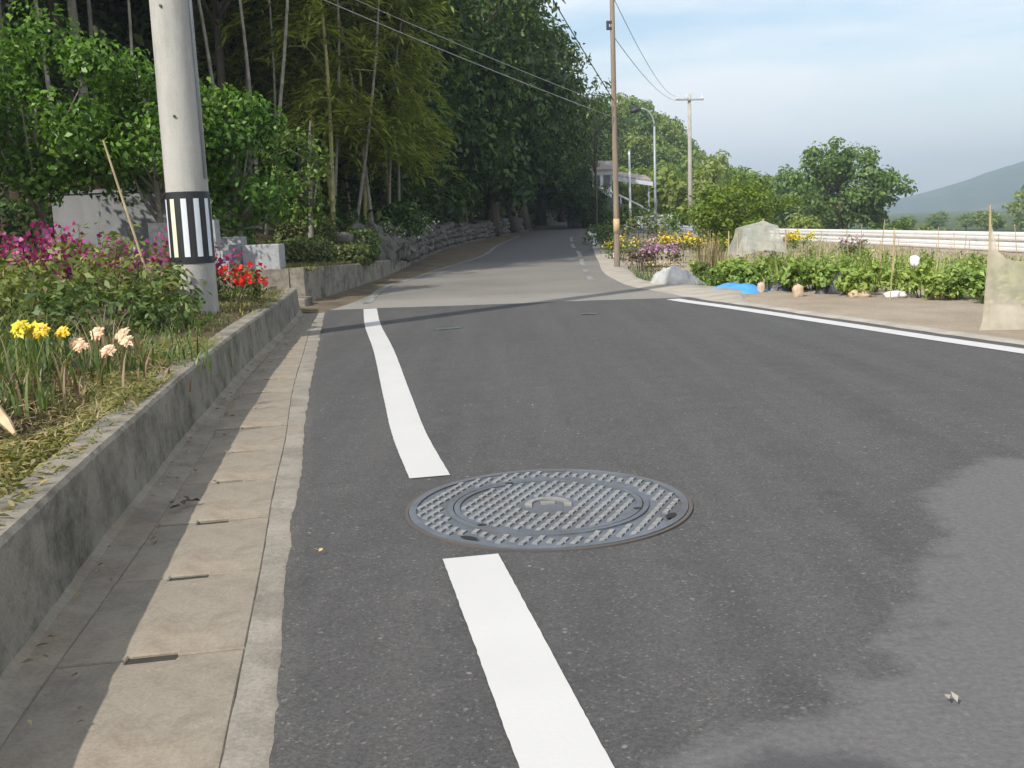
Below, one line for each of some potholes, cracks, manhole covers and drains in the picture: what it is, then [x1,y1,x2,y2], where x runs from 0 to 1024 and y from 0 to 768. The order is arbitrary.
manhole cover [405,469,693,552]
